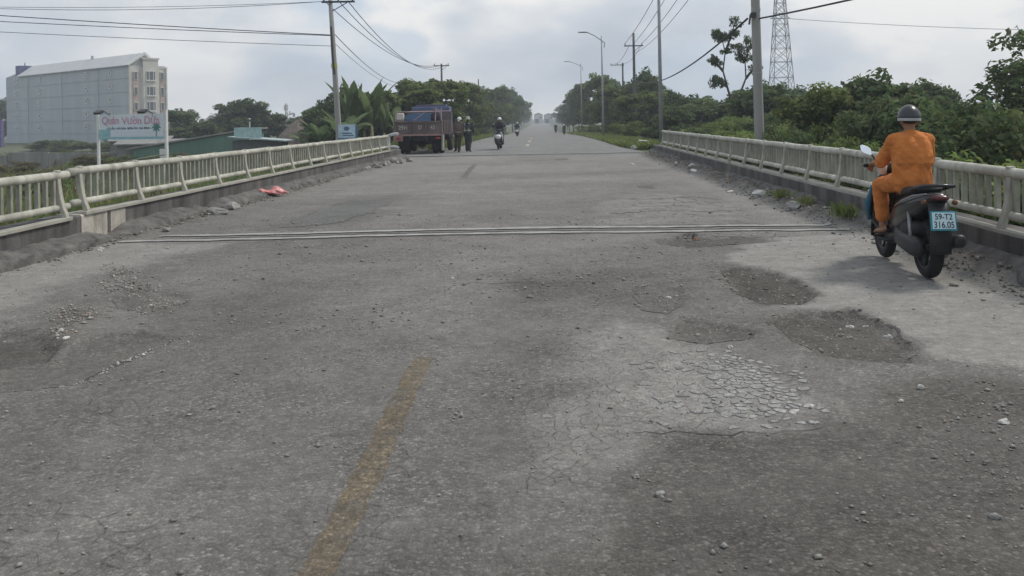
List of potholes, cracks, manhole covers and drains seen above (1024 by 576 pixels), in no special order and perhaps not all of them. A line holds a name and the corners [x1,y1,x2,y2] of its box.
pothole [657,238,776,248]
pothole [720,268,817,305]
pothole [666,320,755,344]
crack [511,328,841,497]
pothole [766,313,920,363]
